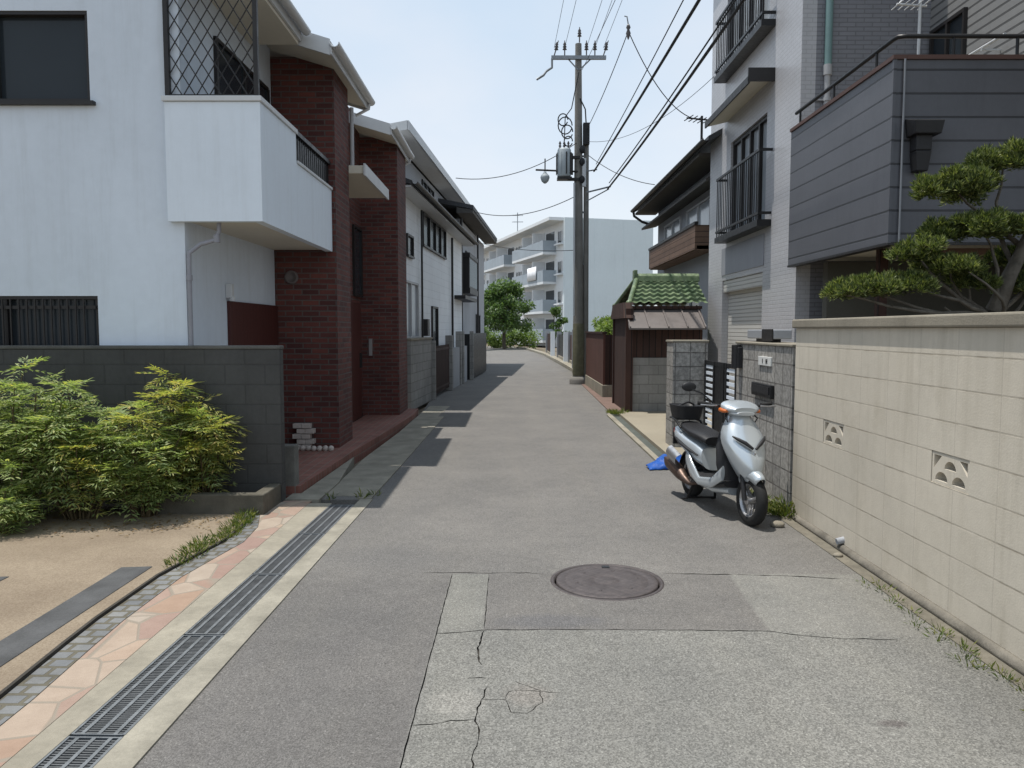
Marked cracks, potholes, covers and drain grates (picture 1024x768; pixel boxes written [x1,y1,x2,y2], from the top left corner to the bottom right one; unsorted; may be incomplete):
drain grate [71,635,224,737]
crack [400,572,887,768]
drain grate [253,533,325,574]
manhole cover [550,564,664,601]
drain grate [33,736,123,768]
drain grate [184,574,285,635]
drain grate [299,504,354,534]
